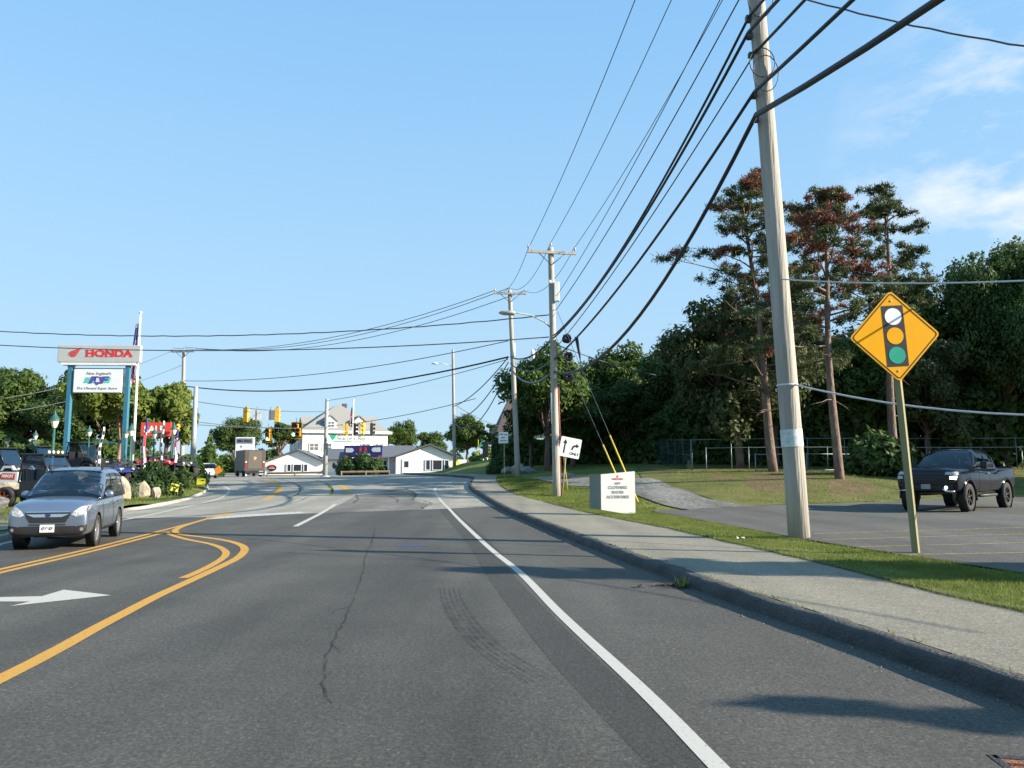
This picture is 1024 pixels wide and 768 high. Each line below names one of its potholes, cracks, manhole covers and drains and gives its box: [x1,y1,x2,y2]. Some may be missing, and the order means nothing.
crack [321,533,375,703]
drain grate [987,755,1024,768]
